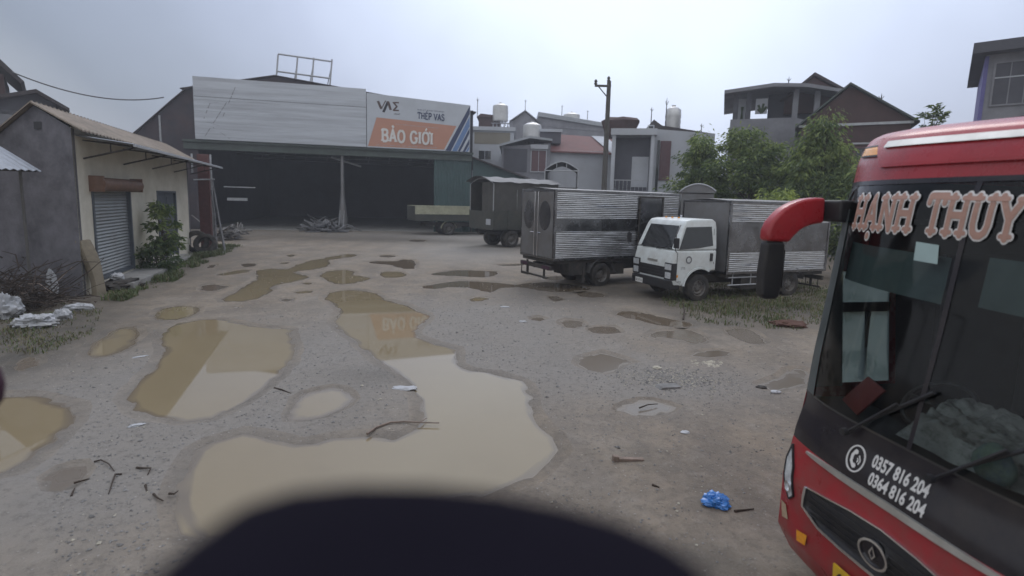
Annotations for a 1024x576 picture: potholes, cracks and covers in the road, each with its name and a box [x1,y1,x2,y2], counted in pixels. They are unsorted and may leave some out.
pothole [571,349,641,375]
pothole [610,396,683,416]
pothole [585,324,625,334]
pothole [156,288,574,547]
pothole [426,269,503,278]
pothole [642,326,715,345]
pothole [721,326,771,346]
pothole [608,308,701,328]
pothole [215,253,362,302]
pothole [75,323,149,359]
pothole [414,279,597,294]
pothole [751,365,810,392]
